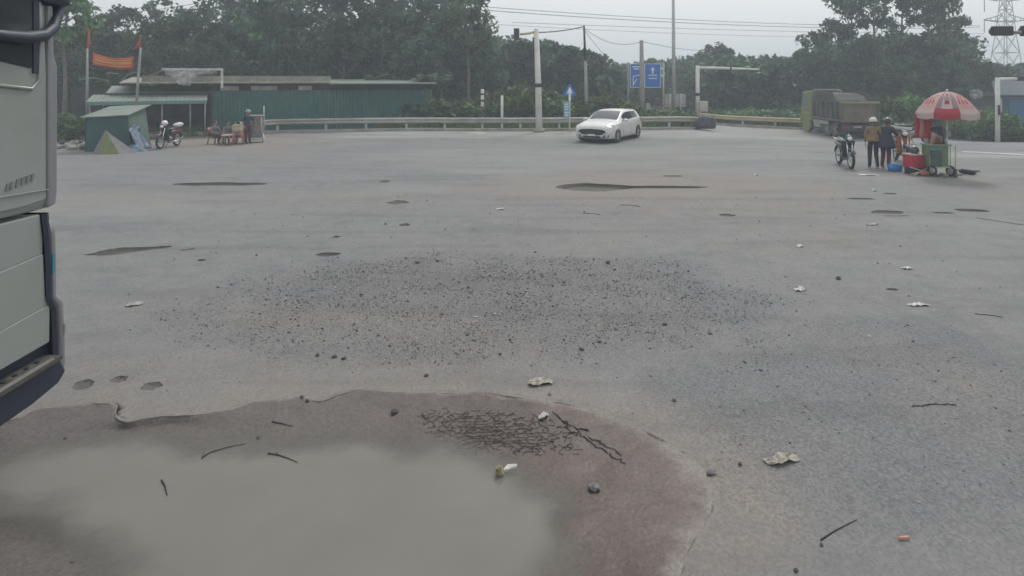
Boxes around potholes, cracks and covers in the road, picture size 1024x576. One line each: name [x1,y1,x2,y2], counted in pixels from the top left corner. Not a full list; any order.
pothole [66,377,100,393]
pothole [550,183,711,192]
pothole [309,251,347,259]
pothole [0,387,722,576]
pothole [135,379,168,393]
crack [421,408,626,464]
pothole [104,373,133,385]
pothole [74,245,181,258]
